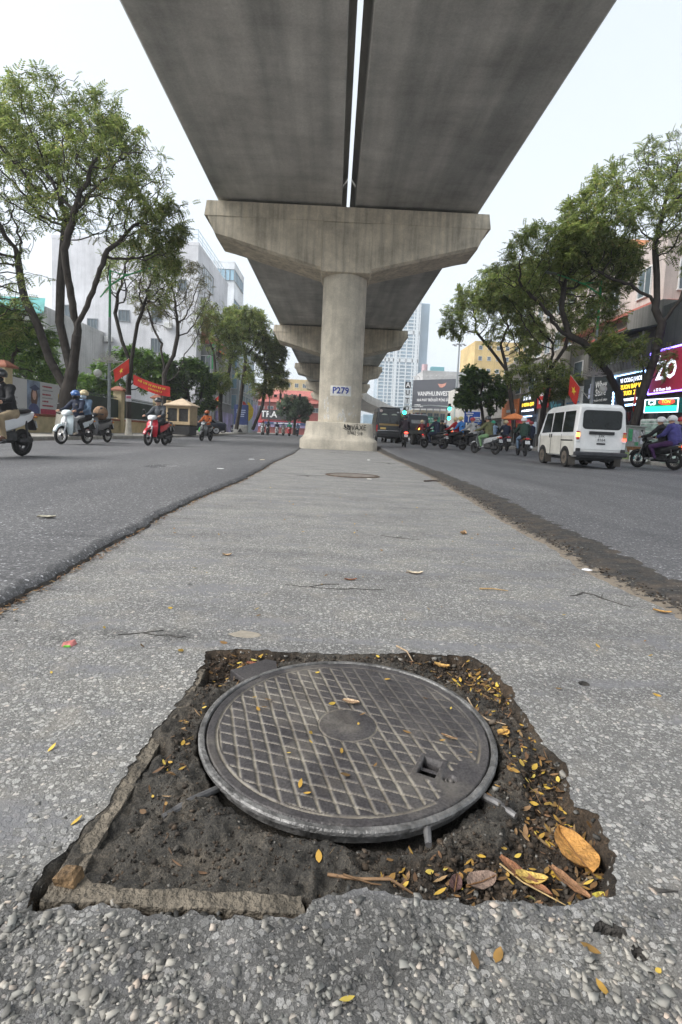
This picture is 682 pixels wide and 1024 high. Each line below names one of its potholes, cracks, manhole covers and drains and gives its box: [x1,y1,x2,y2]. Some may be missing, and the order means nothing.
crack [570,592,630,607]
manhole cover [161,659,518,848]
crack [118,630,186,638]
pothole [27,649,617,920]
